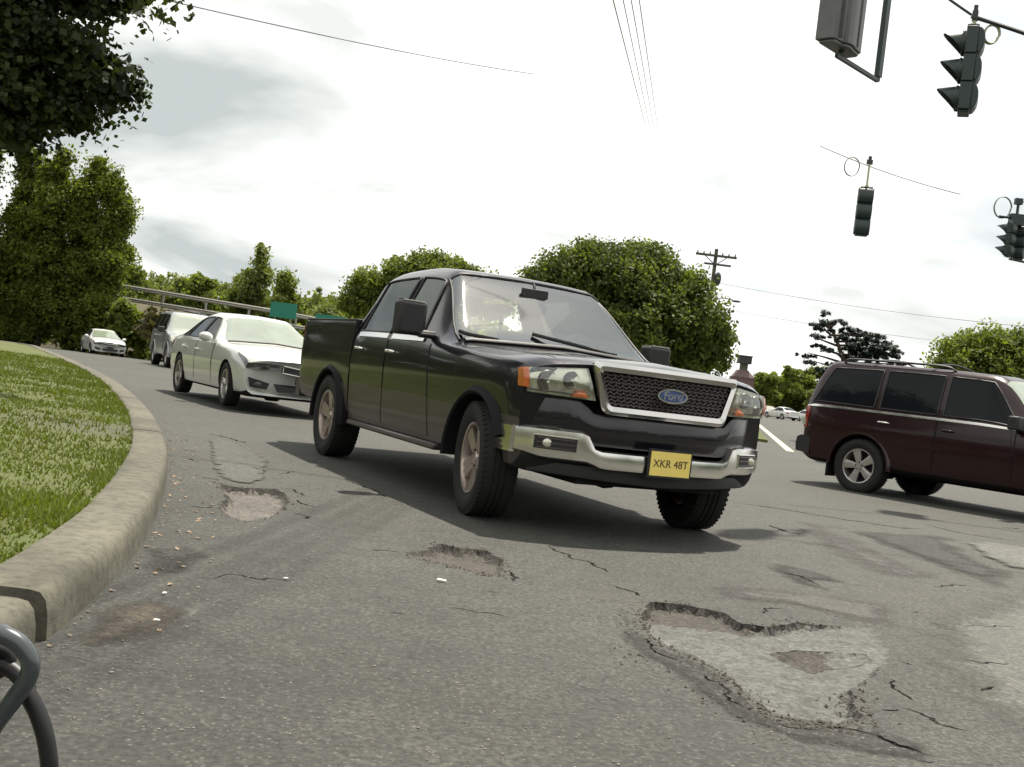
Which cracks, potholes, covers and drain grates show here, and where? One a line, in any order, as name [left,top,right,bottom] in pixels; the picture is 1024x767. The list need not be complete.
pothole [639,602,890,728]
pothole [406,544,505,575]
crack [548,546,640,596]
pothole [218,483,290,521]
crack [883,662,966,731]
